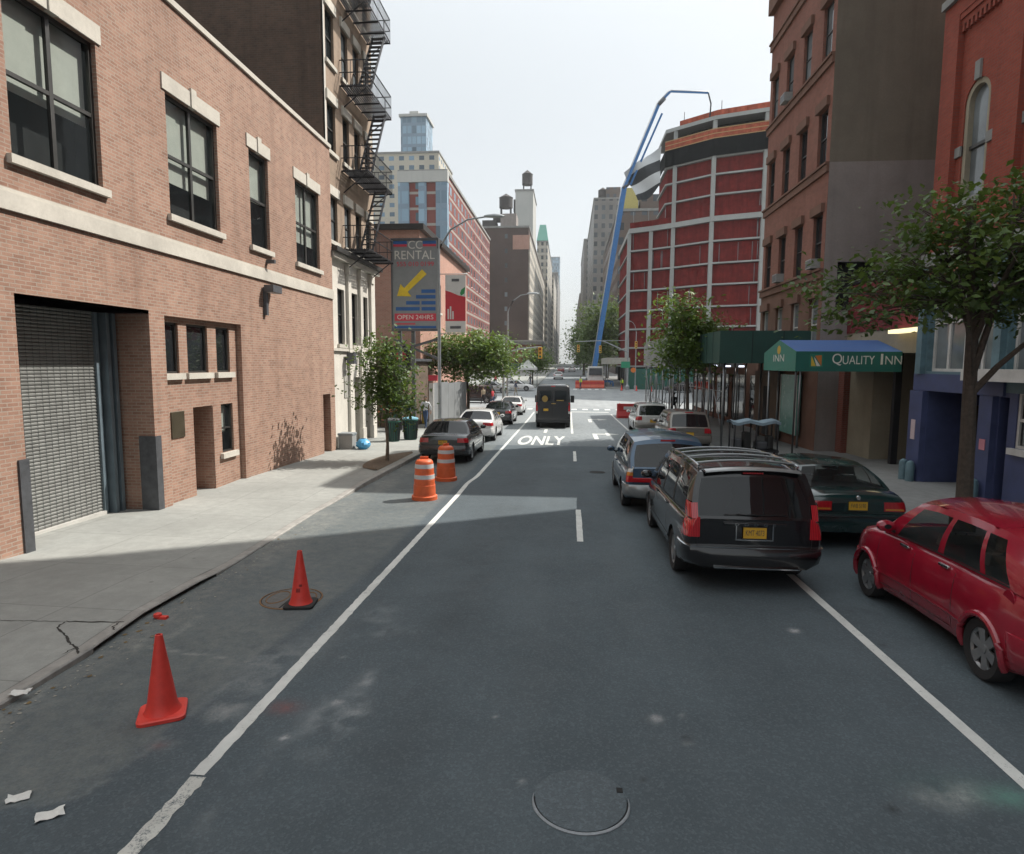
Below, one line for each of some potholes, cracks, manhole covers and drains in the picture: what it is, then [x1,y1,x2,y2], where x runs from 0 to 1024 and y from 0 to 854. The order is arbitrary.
manhole cover [532,770,630,836]
manhole cover [259,588,323,610]
crack [3,620,124,654]
